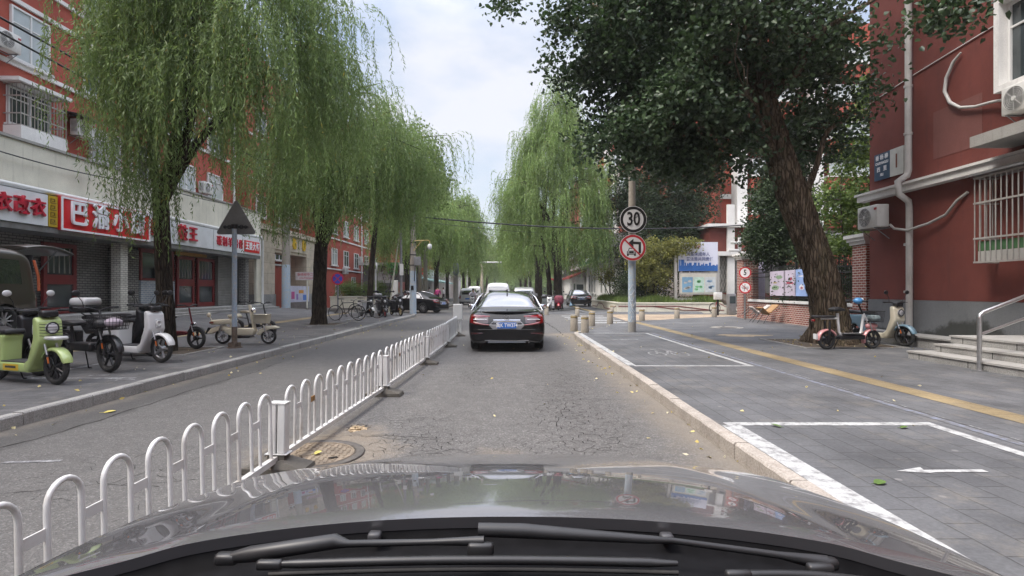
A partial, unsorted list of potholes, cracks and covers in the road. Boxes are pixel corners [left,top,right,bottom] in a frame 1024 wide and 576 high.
crack [327,409,518,461]
crack [483,366,647,456]
manhole cover [255,440,365,467]
